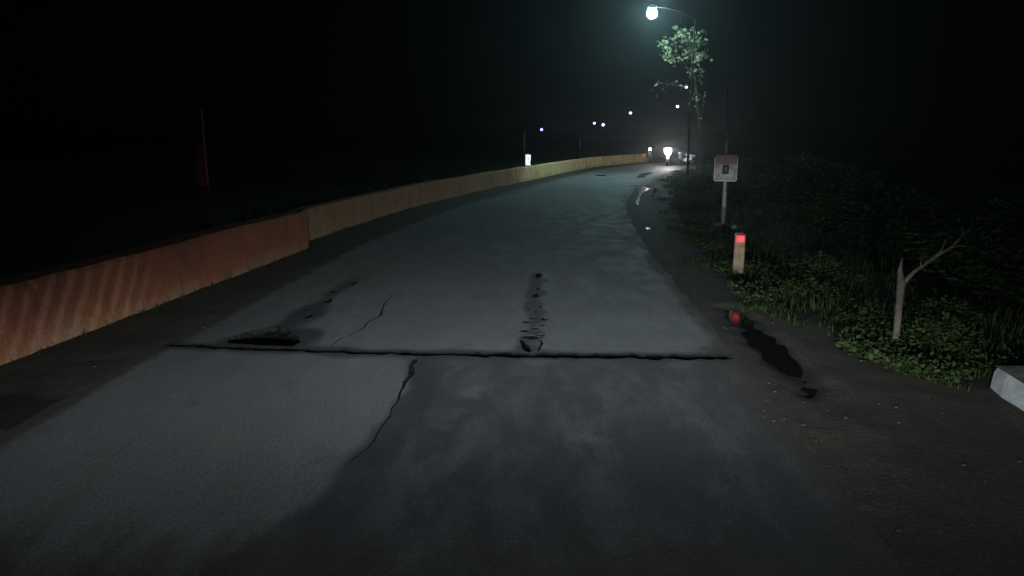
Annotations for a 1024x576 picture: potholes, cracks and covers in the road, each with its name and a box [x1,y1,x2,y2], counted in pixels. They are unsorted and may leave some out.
crack [303,281,418,464]
pothole [227,326,301,346]
